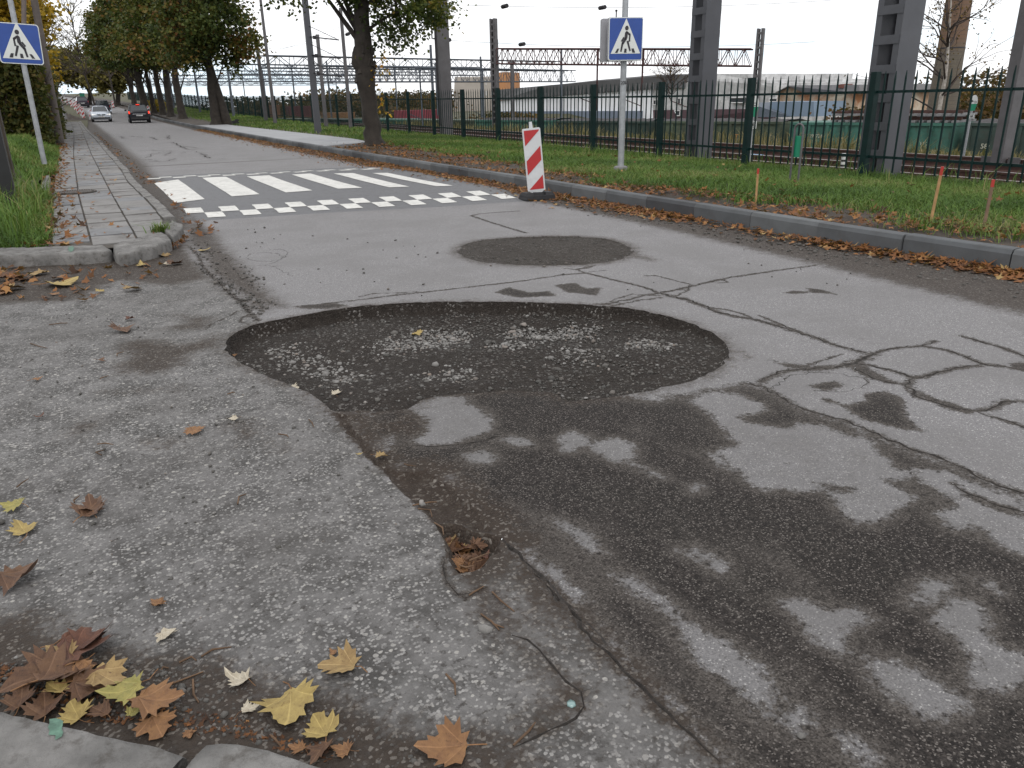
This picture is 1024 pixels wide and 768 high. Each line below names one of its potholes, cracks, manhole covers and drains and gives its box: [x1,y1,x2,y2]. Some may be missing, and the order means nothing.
crack [304,265,1024,512]
pothole [435,523,501,573]
pothole [224,301,729,412]
crack [512,635,592,747]
